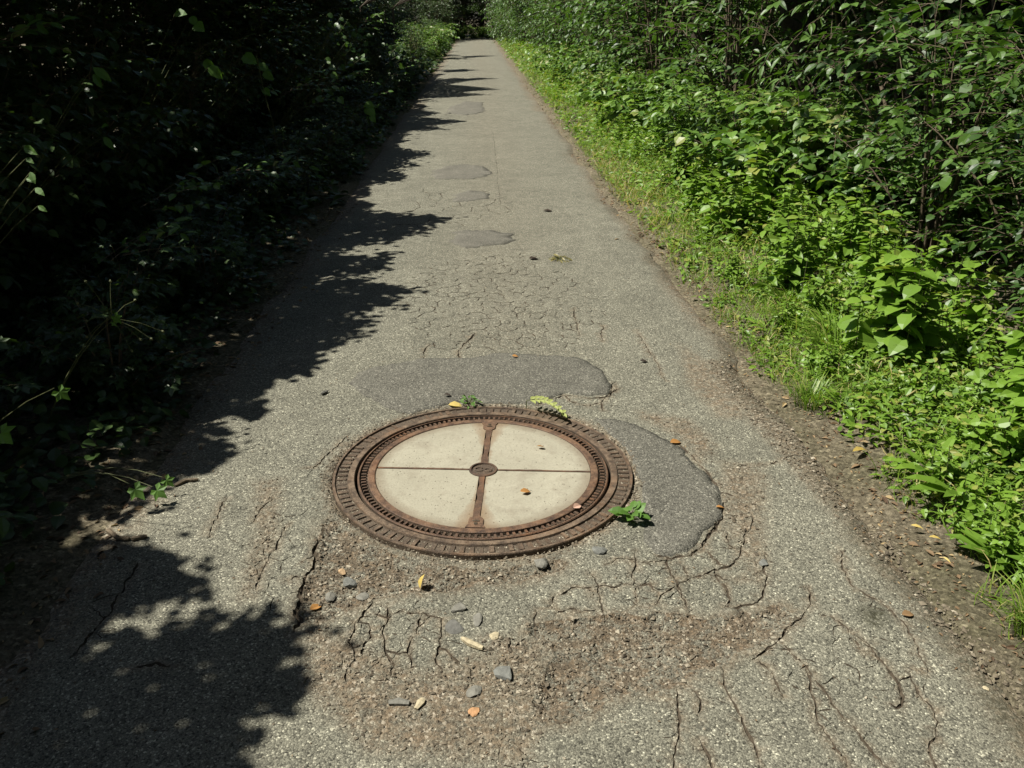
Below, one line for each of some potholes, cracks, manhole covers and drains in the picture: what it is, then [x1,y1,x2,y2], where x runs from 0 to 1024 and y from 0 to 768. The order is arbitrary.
crack [77,562,138,652]
crack [336,598,472,682]
crack [508,519,939,768]
crack [402,253,606,358]
crack [221,499,335,632]
manhole cover [332,406,633,561]
